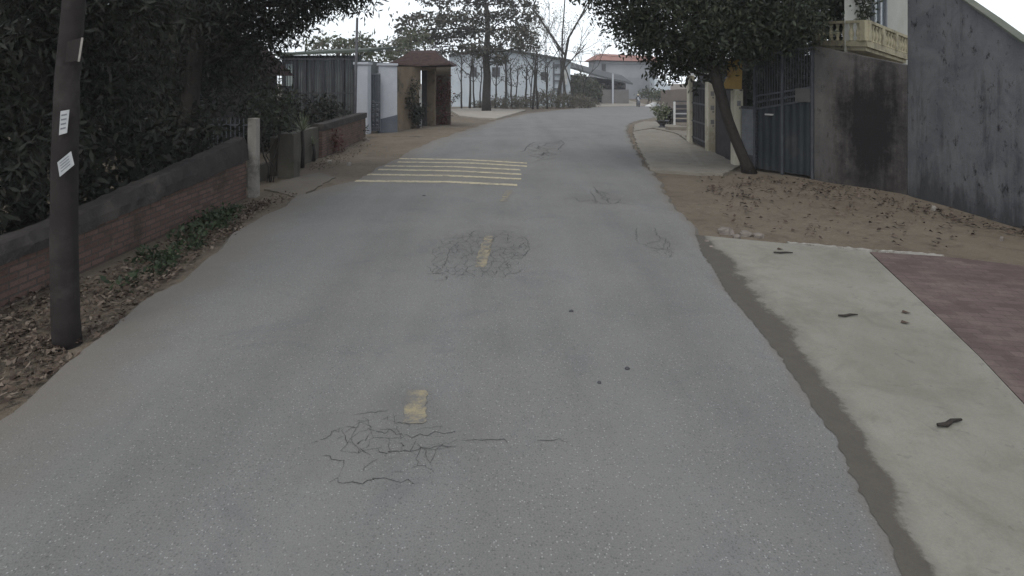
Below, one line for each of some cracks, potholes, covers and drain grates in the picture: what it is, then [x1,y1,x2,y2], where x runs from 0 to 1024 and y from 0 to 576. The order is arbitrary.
crack [309,410,505,484]
crack [424,230,529,281]
crack [521,140,565,161]
